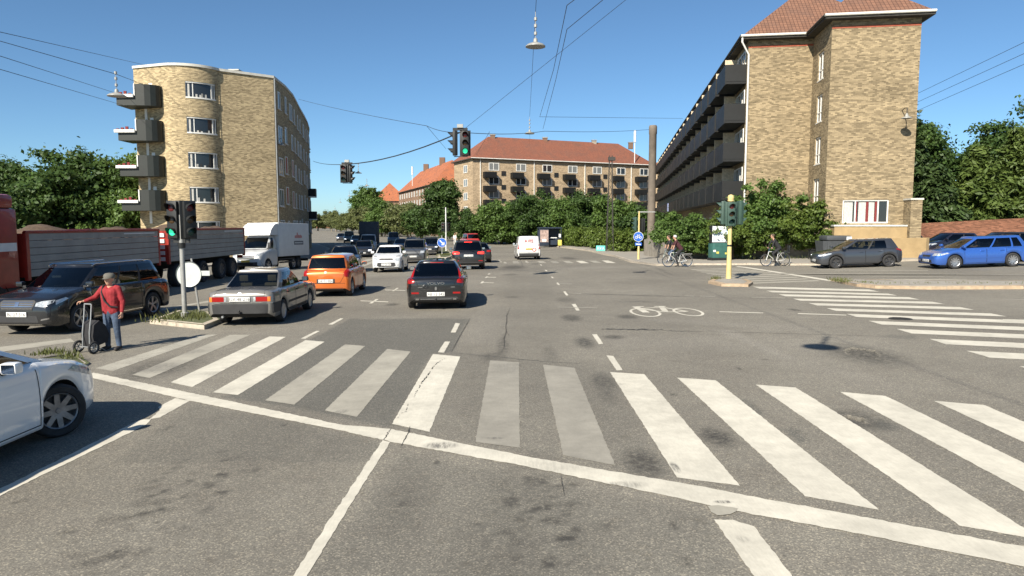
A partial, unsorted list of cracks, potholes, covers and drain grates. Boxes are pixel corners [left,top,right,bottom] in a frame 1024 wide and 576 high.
crack [385,358,445,446]
